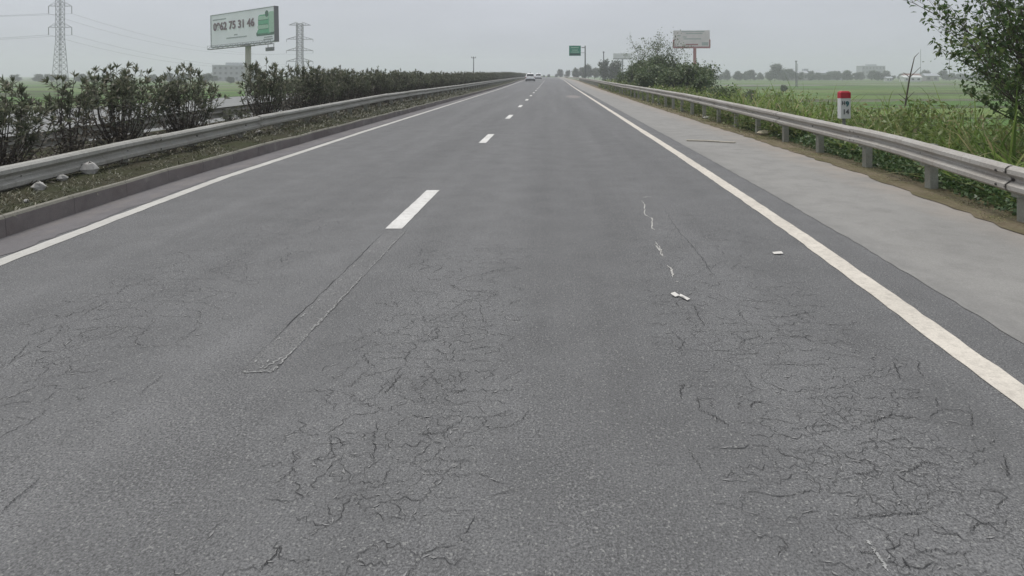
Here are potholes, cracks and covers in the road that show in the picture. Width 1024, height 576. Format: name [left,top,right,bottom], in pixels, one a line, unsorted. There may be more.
crack [160,230,528,576]
crack [0,195,377,436]
crack [618,210,1024,576]
